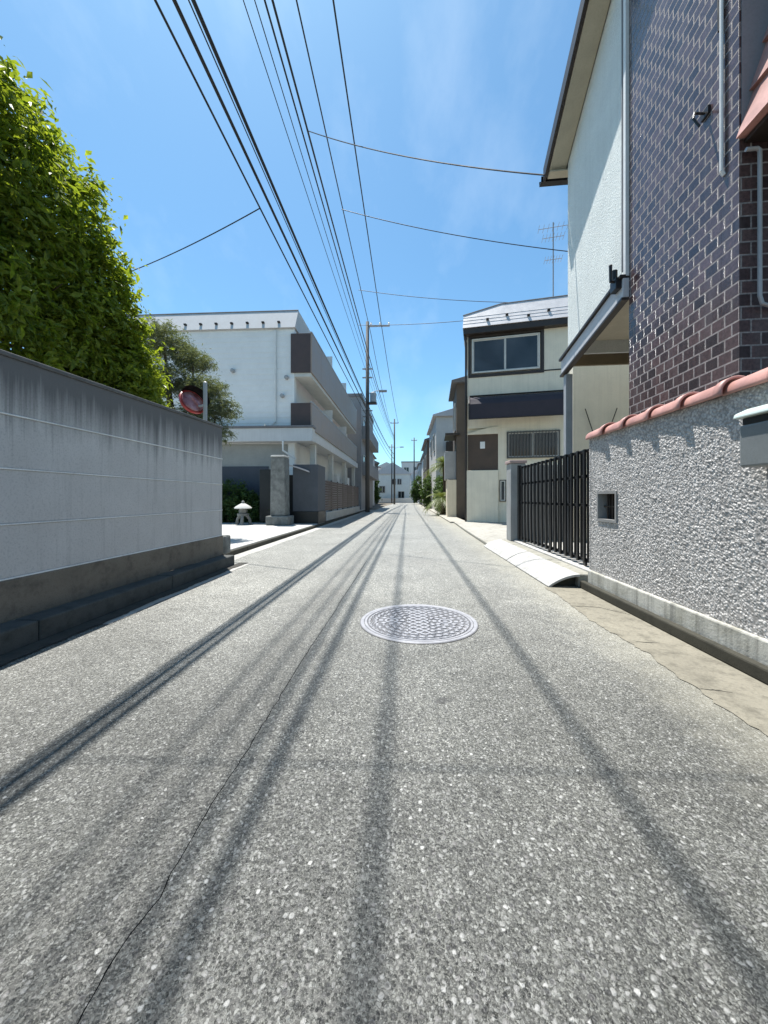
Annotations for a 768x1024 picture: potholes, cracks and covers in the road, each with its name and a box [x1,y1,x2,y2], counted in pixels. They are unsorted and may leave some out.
crack [77,559,368,1024]
manhole cover [360,604,478,644]
